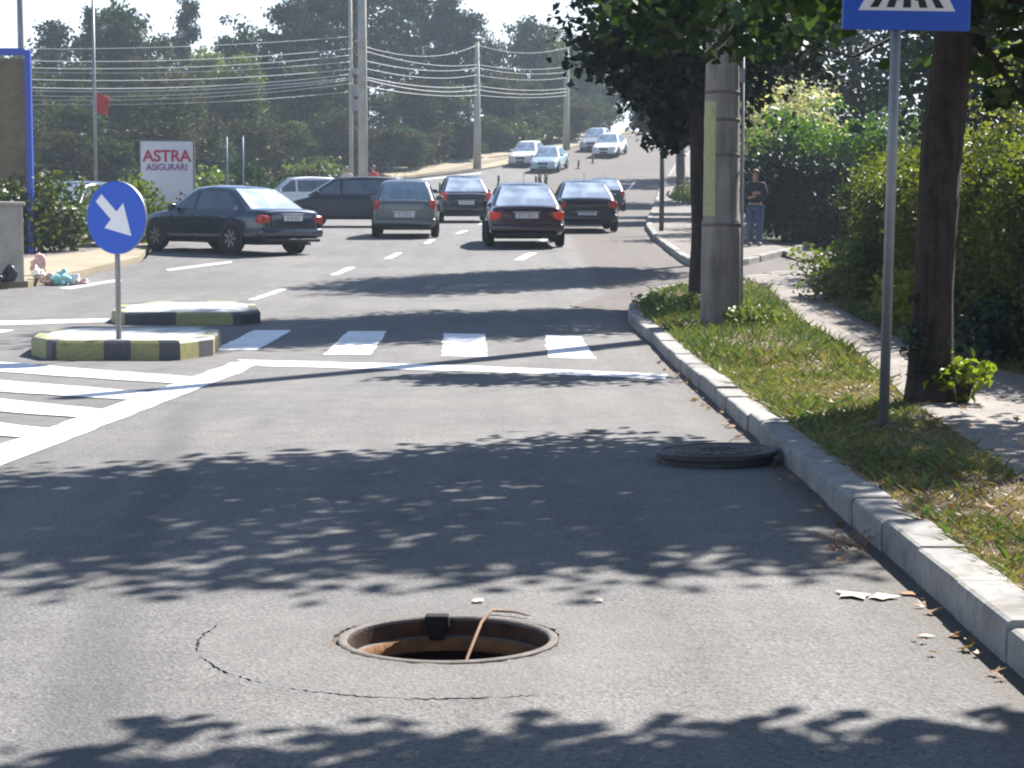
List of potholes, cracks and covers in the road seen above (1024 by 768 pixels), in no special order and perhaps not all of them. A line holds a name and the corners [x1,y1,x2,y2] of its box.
manhole cover [655,442,778,469]
crack [195,621,537,700]
